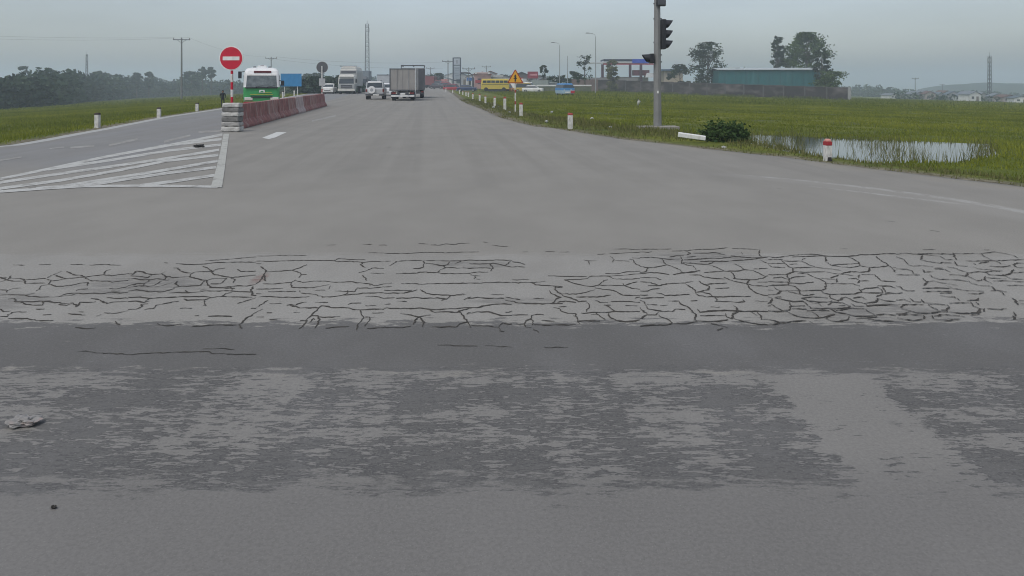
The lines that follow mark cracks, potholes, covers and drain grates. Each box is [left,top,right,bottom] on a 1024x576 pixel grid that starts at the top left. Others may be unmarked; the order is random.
crack [0,243,523,332]
crack [512,247,1024,332]
